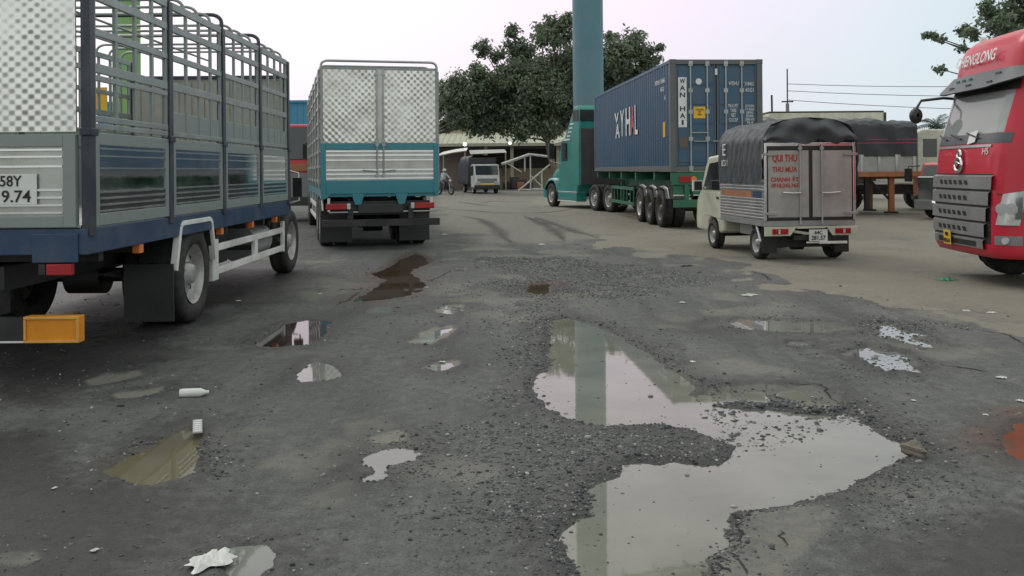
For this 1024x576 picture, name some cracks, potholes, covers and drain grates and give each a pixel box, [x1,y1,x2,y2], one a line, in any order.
pothole [88,418,218,490]
pothole [243,317,340,348]
pothole [340,441,441,487]
pothole [400,323,465,346]
pothole [515,315,949,576]
pothole [283,356,354,384]
pothole [340,252,435,304]
pothole [412,356,471,372]
